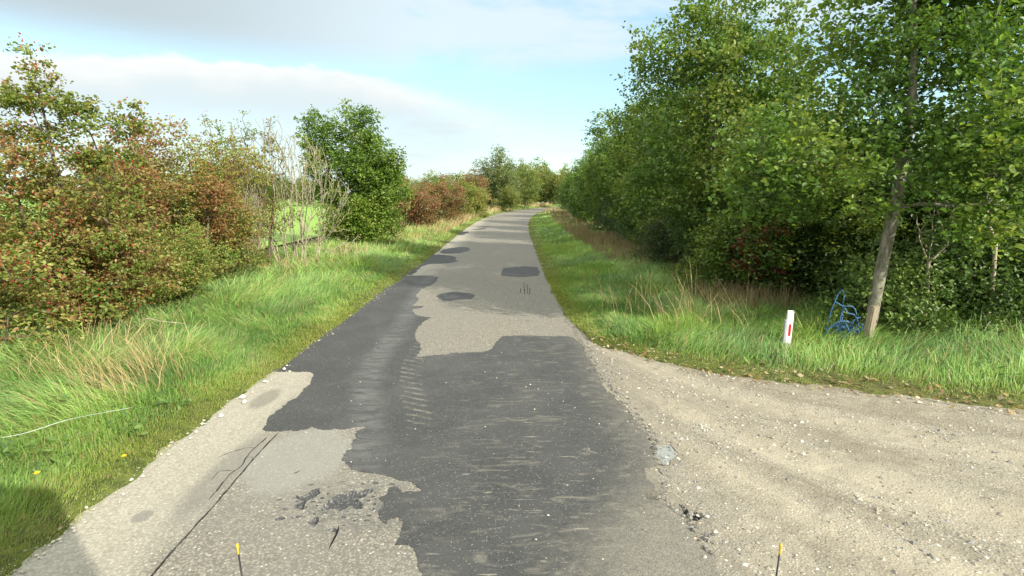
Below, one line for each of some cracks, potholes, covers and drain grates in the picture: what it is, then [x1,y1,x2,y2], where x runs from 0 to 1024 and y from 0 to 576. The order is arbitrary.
crack [150,433,301,576]
pothole [275,486,330,521]
pothole [679,504,704,521]
pothole [308,481,395,532]
pothole [655,444,678,466]
